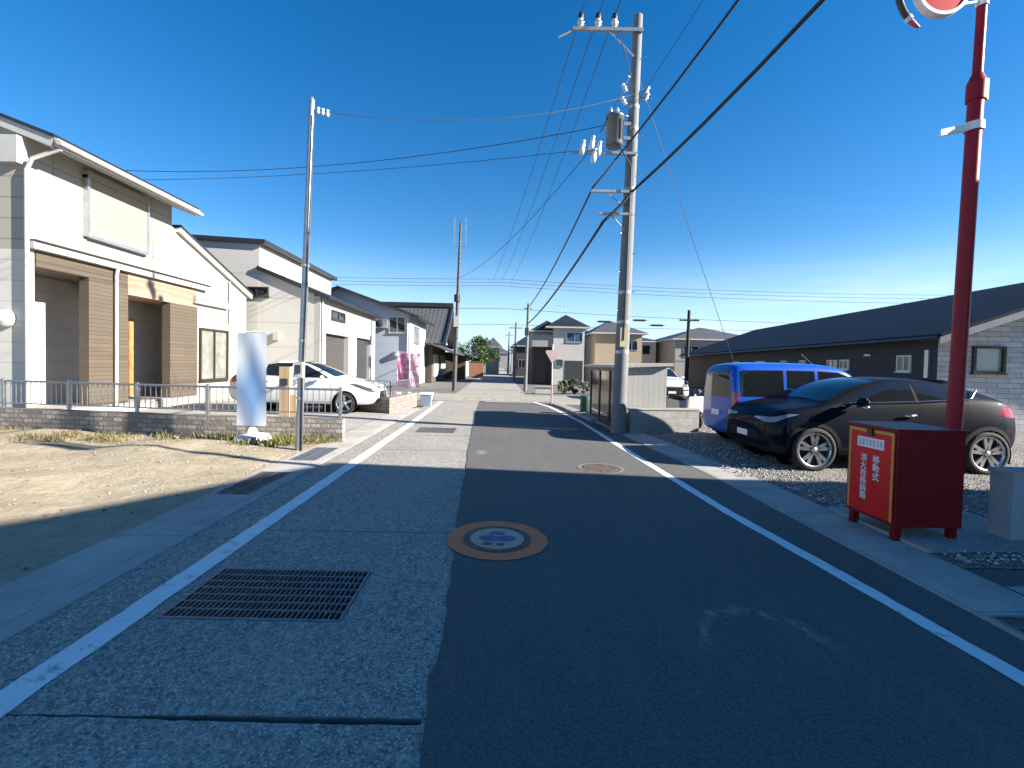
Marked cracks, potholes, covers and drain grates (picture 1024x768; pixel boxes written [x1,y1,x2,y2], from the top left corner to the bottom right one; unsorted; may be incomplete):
manhole cover [446,521,548,560]
drain grate [156,567,372,622]
manhole cover [578,463,625,474]
drain grate [988,615,1024,634]
drain grate [289,447,338,461]
drain grate [213,471,292,495]
